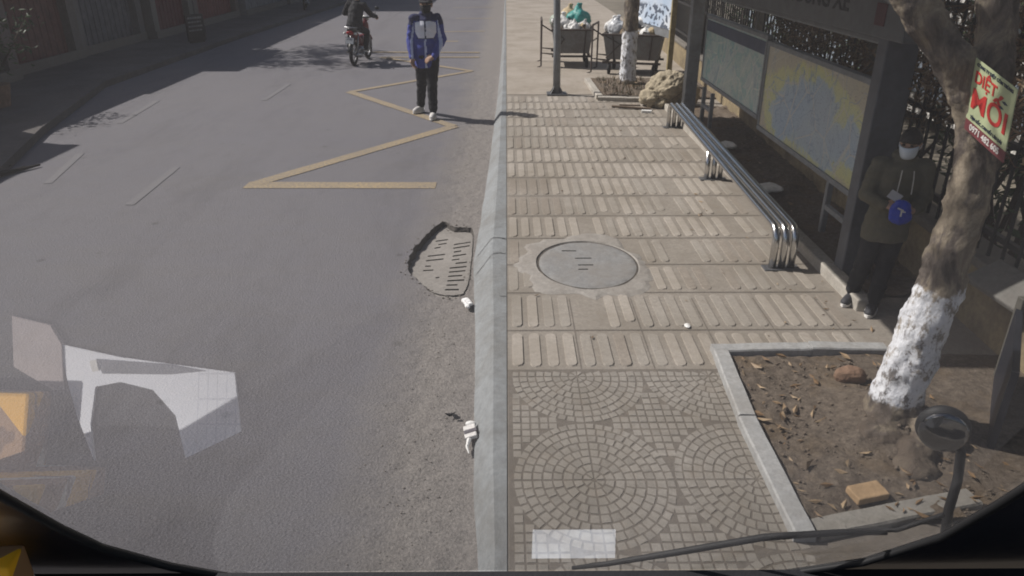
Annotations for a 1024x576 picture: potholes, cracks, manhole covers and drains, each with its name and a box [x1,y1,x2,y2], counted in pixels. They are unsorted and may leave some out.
drain grate [409,227,473,295]
manhole cover [513,233,654,300]
